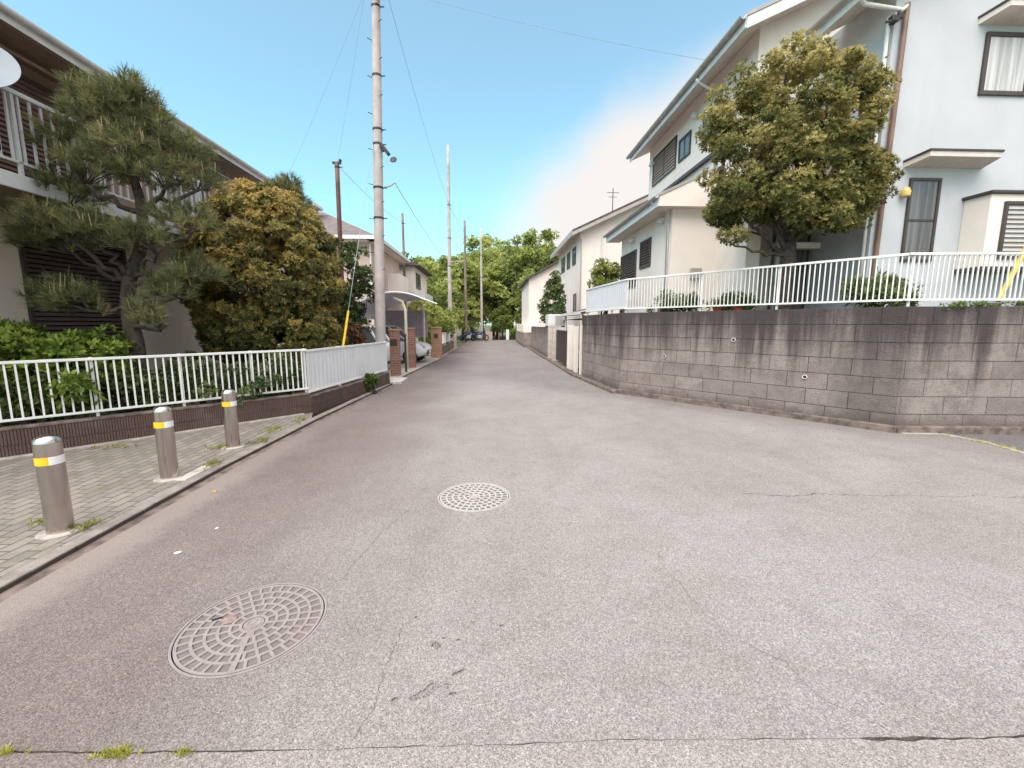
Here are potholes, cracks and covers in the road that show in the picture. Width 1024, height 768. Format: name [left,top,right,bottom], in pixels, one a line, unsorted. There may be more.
manhole cover [168,583,327,679]
manhole cover [438,483,510,512]
crack [667,572,892,733]
crack [356,623,404,735]
